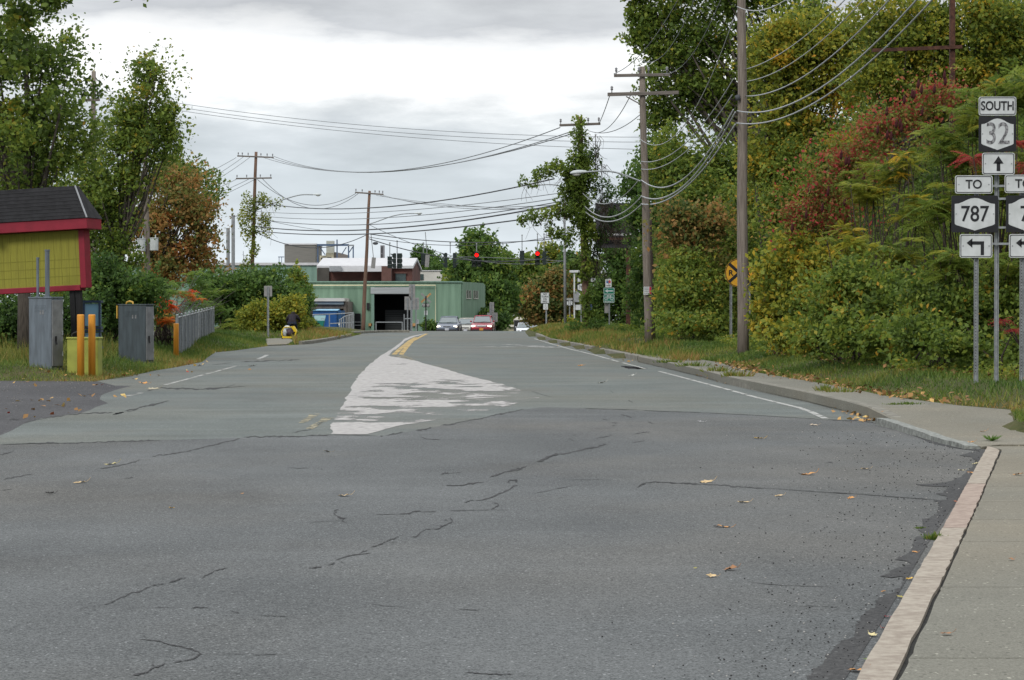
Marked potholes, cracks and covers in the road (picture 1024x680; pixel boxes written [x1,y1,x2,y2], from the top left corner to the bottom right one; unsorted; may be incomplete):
crack [134,606,291,675]
crack [82,568,225,608]
crack [309,400,937,568]
